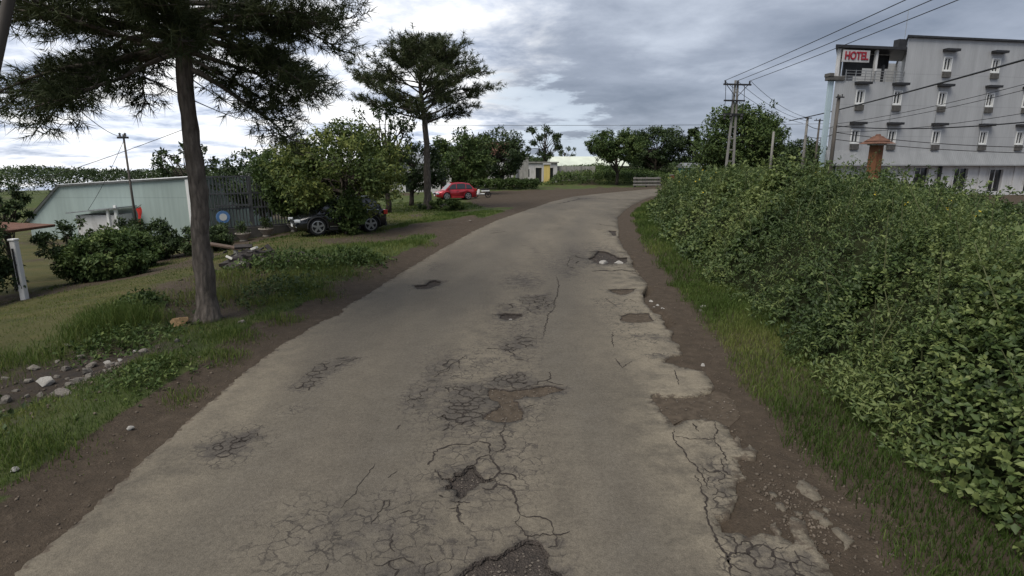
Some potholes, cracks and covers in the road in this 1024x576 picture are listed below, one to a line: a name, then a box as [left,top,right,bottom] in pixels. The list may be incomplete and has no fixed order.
pothole [459,534,564,576]
pothole [414,280,441,289]
pothole [588,251,635,264]
pothole [441,465,496,499]
pothole [620,313,654,323]
crack [672,422,815,576]
crack [295,357,357,390]
crack [397,251,628,576]
crack [326,466,452,576]
